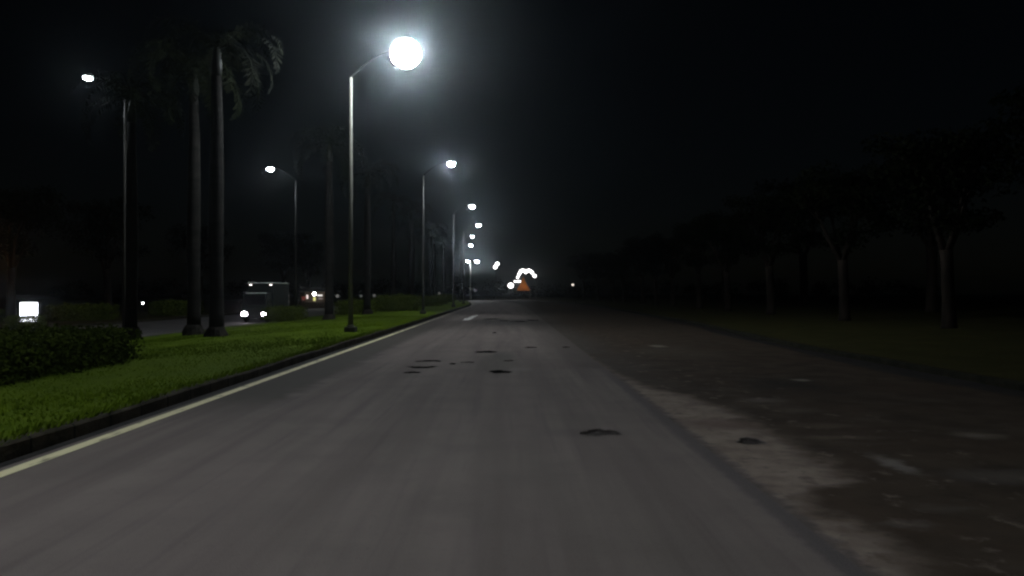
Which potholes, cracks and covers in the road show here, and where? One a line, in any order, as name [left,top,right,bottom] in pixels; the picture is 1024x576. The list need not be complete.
pothole [578,428,621,437]
